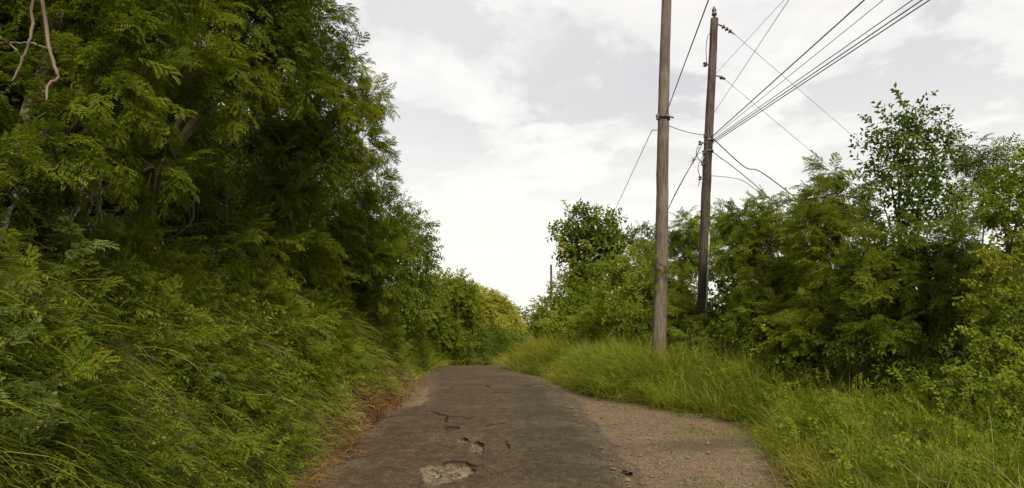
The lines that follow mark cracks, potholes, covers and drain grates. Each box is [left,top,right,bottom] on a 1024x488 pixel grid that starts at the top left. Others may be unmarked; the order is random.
pothole [468,441,485,455]
pothole [417,460,478,486]
crack [432,412,511,449]
crack [443,376,547,393]
